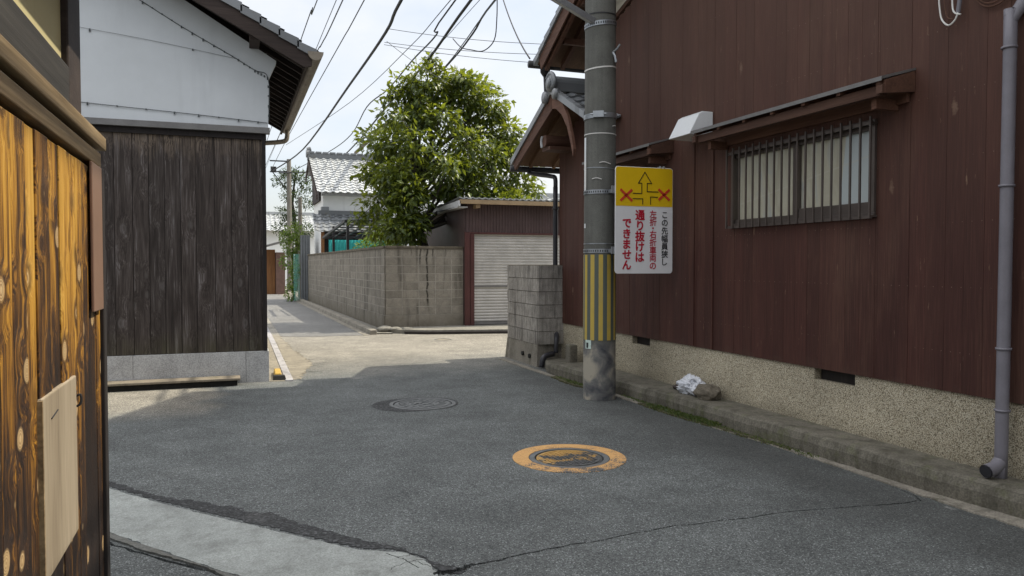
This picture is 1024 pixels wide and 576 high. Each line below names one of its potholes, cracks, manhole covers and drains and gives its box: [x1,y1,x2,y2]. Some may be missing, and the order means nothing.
manhole cover [389,398,456,410]
manhole cover [513,444,626,473]
